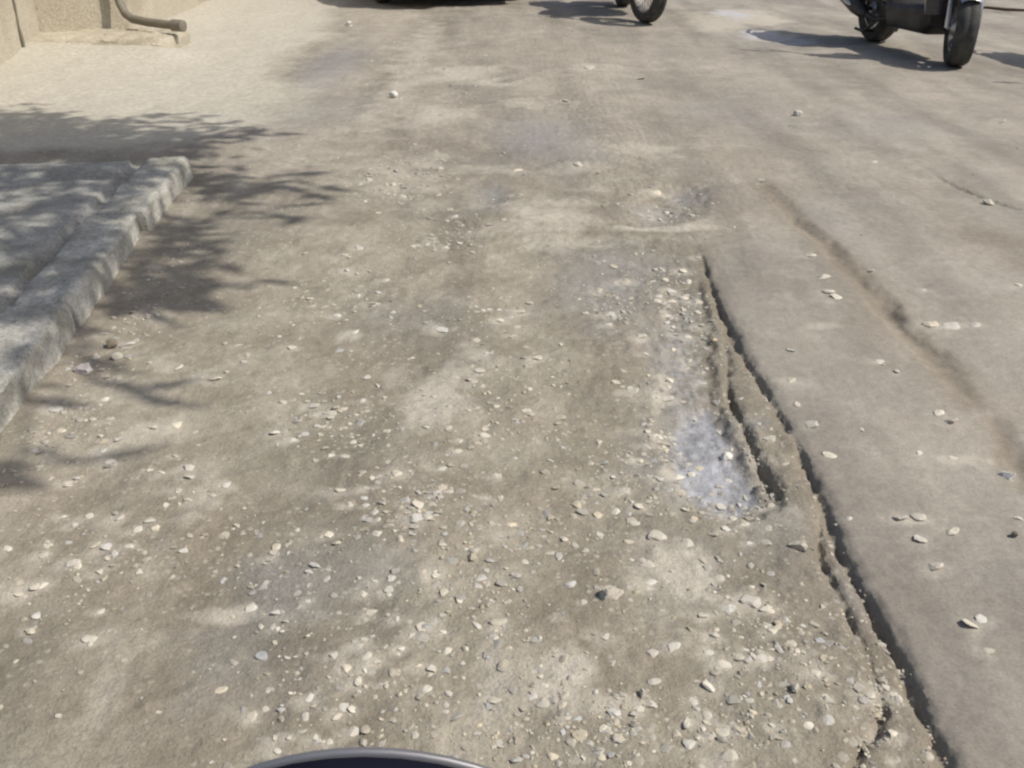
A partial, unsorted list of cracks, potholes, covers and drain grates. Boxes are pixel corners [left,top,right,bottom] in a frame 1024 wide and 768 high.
pothole [647,281,788,527]
crack [700,173,1024,768]
